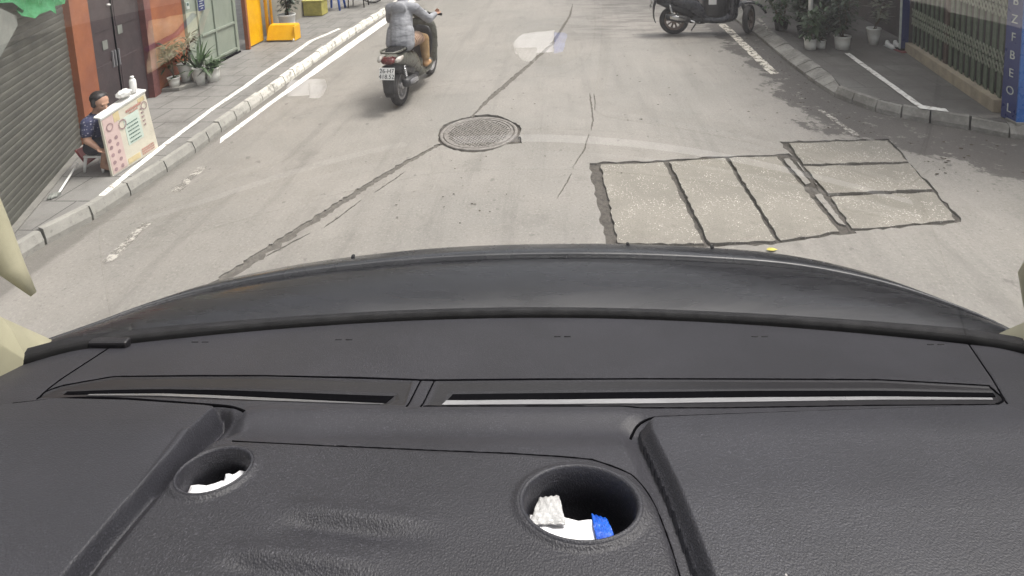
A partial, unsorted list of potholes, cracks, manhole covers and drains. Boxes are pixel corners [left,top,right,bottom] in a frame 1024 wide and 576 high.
crack [219,5,596,281]
manhole cover [438,116,522,152]
